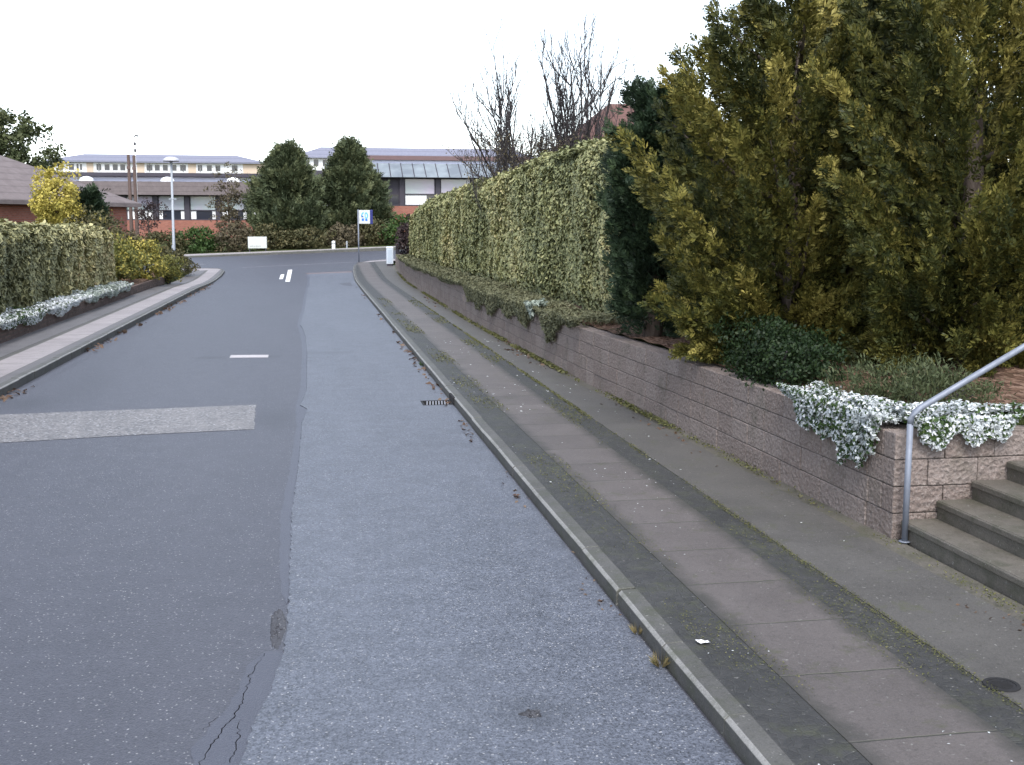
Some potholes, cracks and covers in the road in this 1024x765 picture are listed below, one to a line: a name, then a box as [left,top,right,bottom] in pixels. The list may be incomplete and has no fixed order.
pothole [270,609,286,650]
pothole [518,709,542,718]
drain grate [421,393,455,405]
crack [199,653,265,764]
manhole cover [982,677,1021,692]
